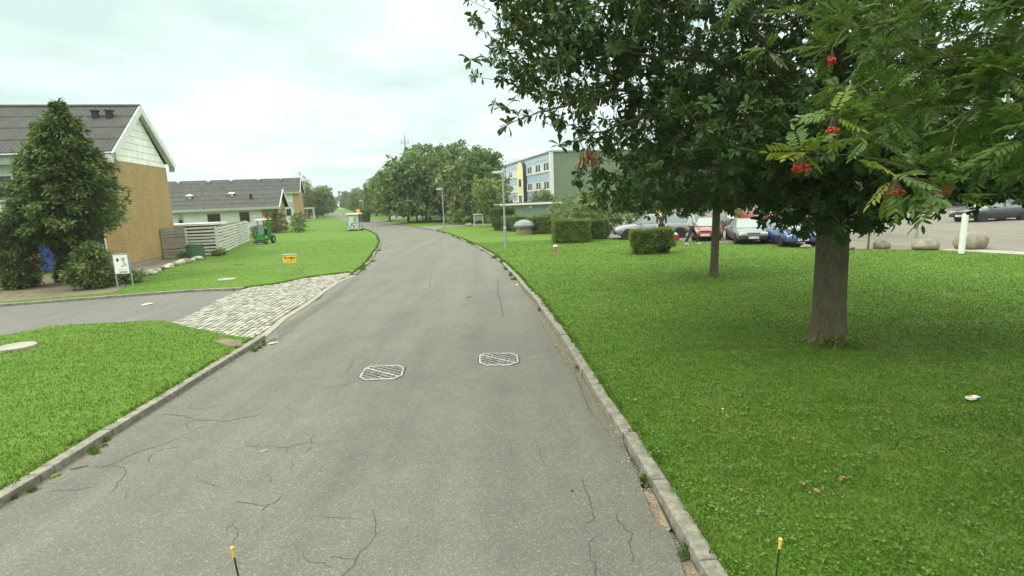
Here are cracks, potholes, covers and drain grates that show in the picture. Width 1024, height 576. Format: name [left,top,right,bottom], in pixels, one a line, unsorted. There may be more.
crack [582,456,597,575]
crack [616,513,634,564]
crack [303,511,376,575]
manhole cover [0,341,38,353]
crack [97,405,257,500]
